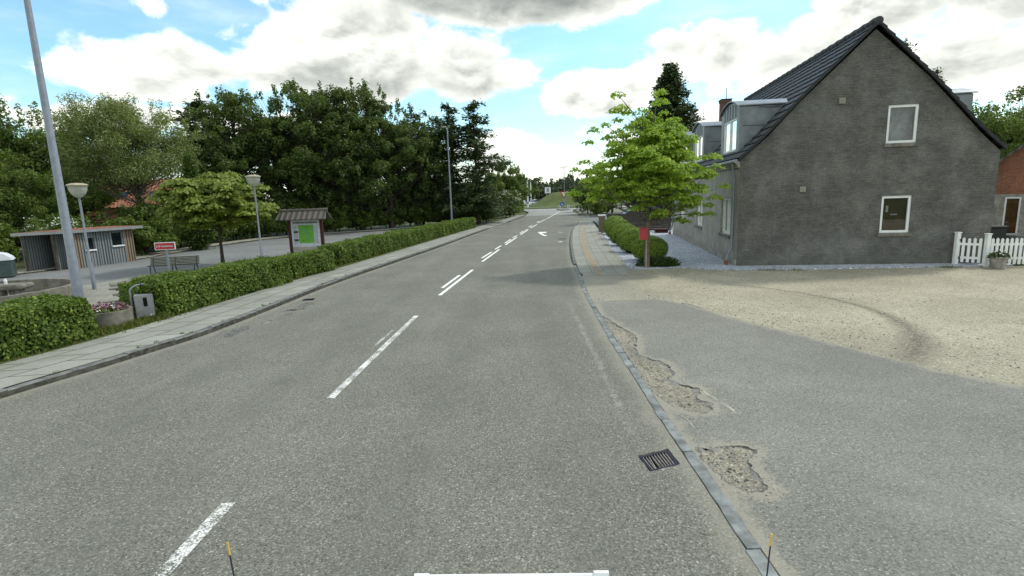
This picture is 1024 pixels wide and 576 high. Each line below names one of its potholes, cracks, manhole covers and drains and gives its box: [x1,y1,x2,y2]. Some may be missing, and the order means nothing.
pothole [695,445,768,493]
crack [679,374,737,414]
pothole [603,316,713,414]
drain grate [638,449,680,471]
